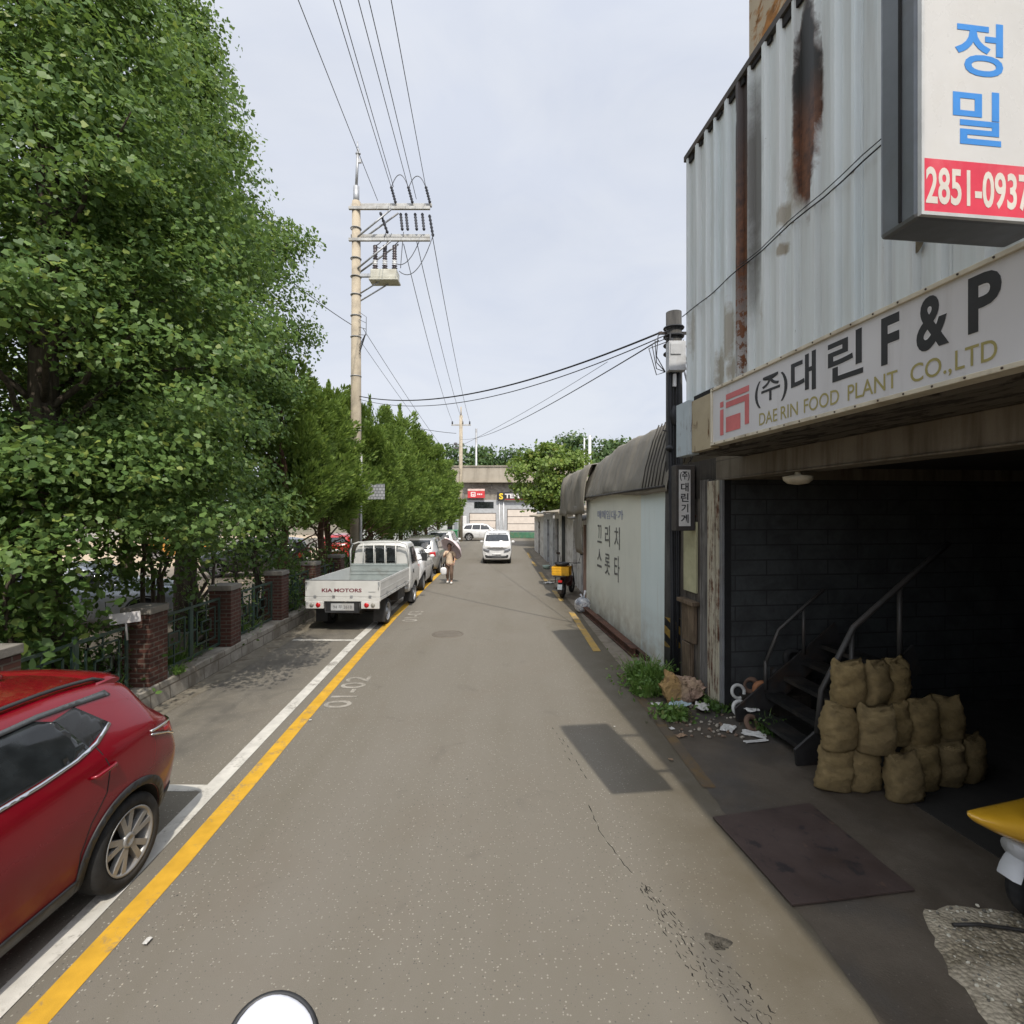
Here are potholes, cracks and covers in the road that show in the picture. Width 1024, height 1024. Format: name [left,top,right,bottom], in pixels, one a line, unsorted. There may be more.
pothole [704,932,733,950]
crack [589,806,776,1024]
manhole cover [432,630,464,638]
